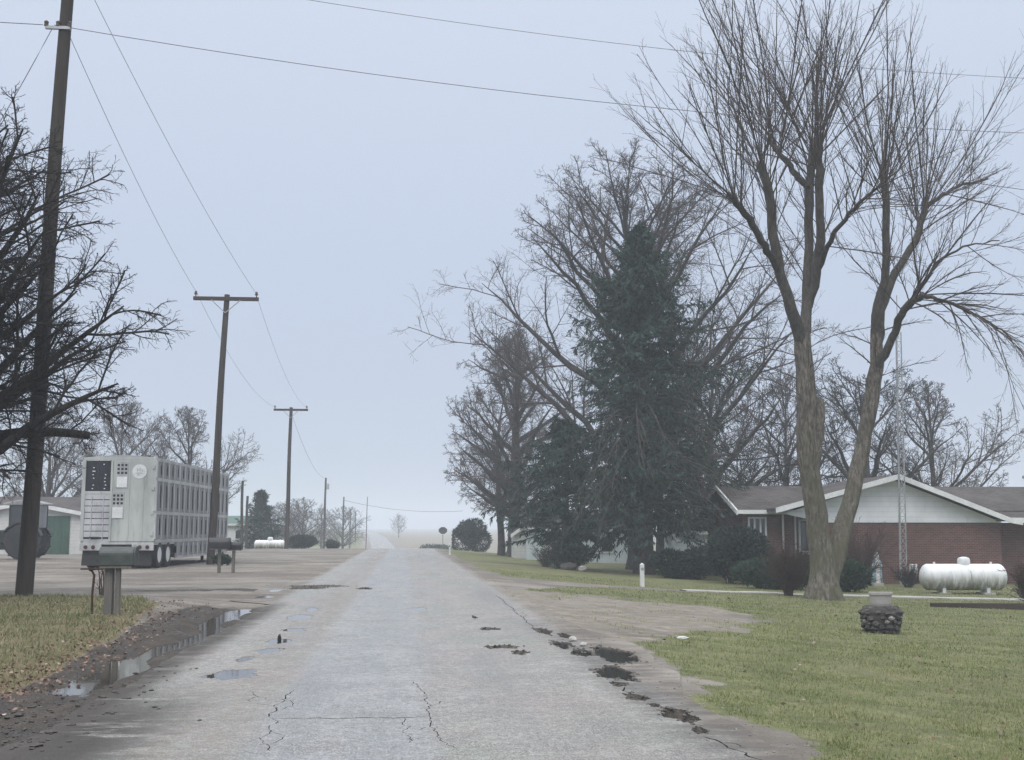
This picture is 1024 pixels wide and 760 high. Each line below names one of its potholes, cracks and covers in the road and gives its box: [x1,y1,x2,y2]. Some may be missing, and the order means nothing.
pothole [588,664,641,682]
pothole [199,669,258,680]
pothole [549,640,576,649]
pothole [622,692,651,701]
pothole [587,644,648,665]
pothole [656,706,701,725]
pothole [570,648,596,657]
crack [248,682,455,751]
